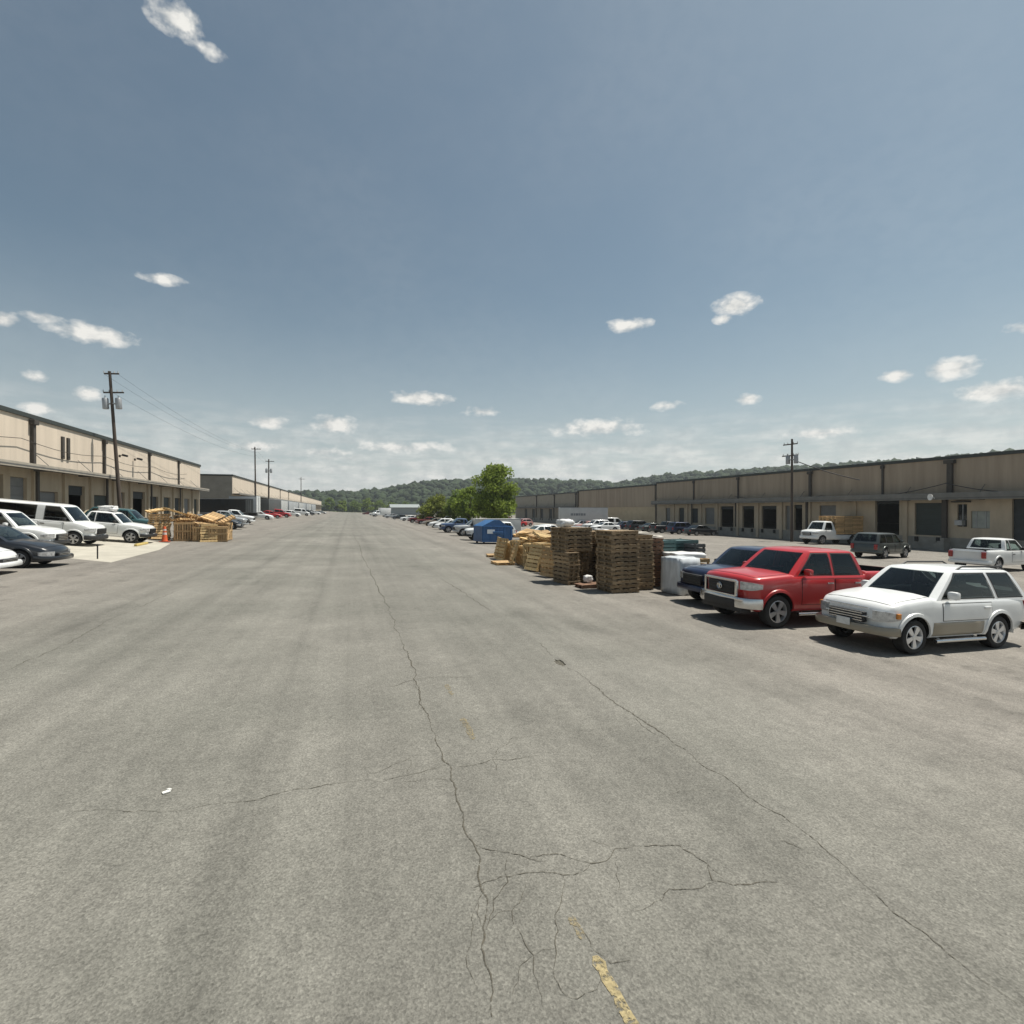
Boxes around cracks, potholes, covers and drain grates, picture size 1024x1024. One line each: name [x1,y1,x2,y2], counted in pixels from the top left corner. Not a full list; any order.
crack [637,845,777,911]
crack [81,735,534,812]
crack [466,838,633,999]
